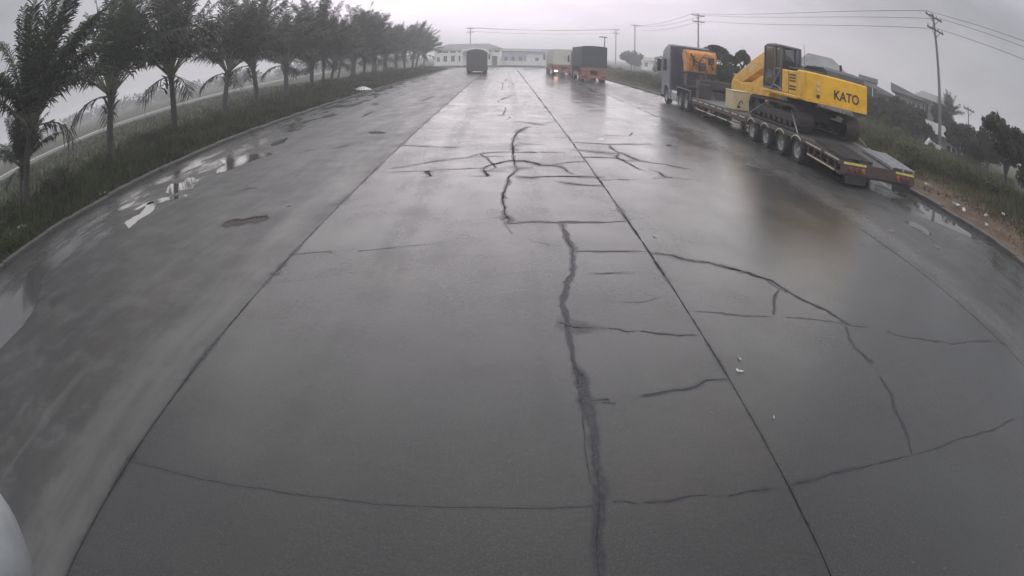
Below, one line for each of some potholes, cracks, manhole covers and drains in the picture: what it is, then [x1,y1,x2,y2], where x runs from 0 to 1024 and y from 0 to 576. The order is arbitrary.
crack [135,80,1013,576]
pothole [222,215,269,228]
